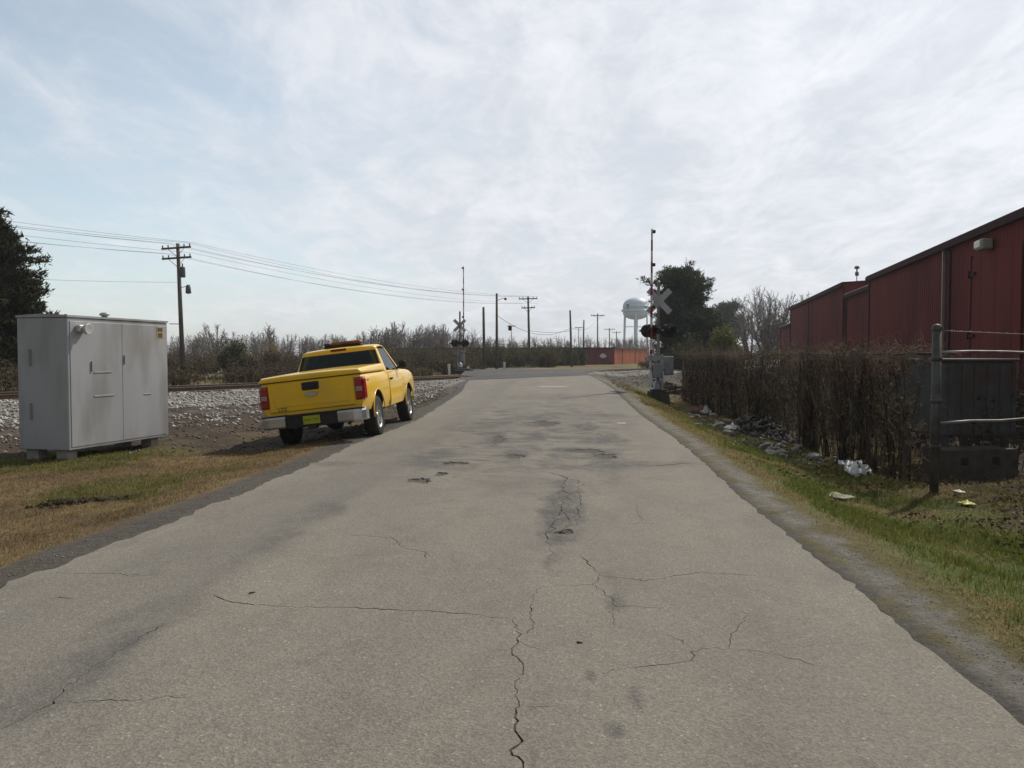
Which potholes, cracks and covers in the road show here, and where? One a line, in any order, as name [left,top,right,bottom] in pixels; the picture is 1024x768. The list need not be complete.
crack [213,555,741,768]
crack [594,613,821,676]
crack [536,470,584,559]
crack [2,625,178,729]
